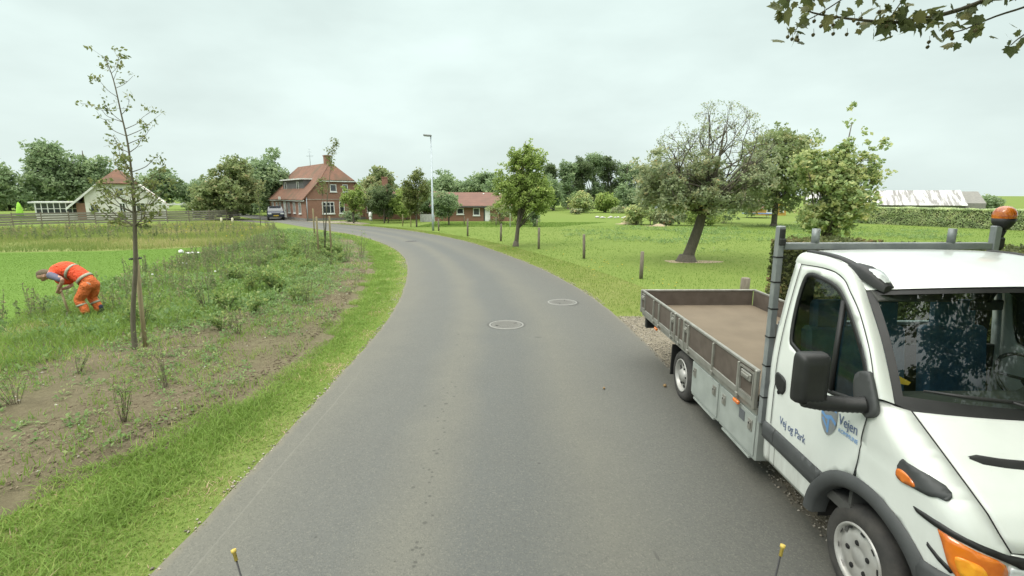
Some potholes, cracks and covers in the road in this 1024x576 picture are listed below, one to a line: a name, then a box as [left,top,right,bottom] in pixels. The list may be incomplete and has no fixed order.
manhole cover [487,320,526,330]
